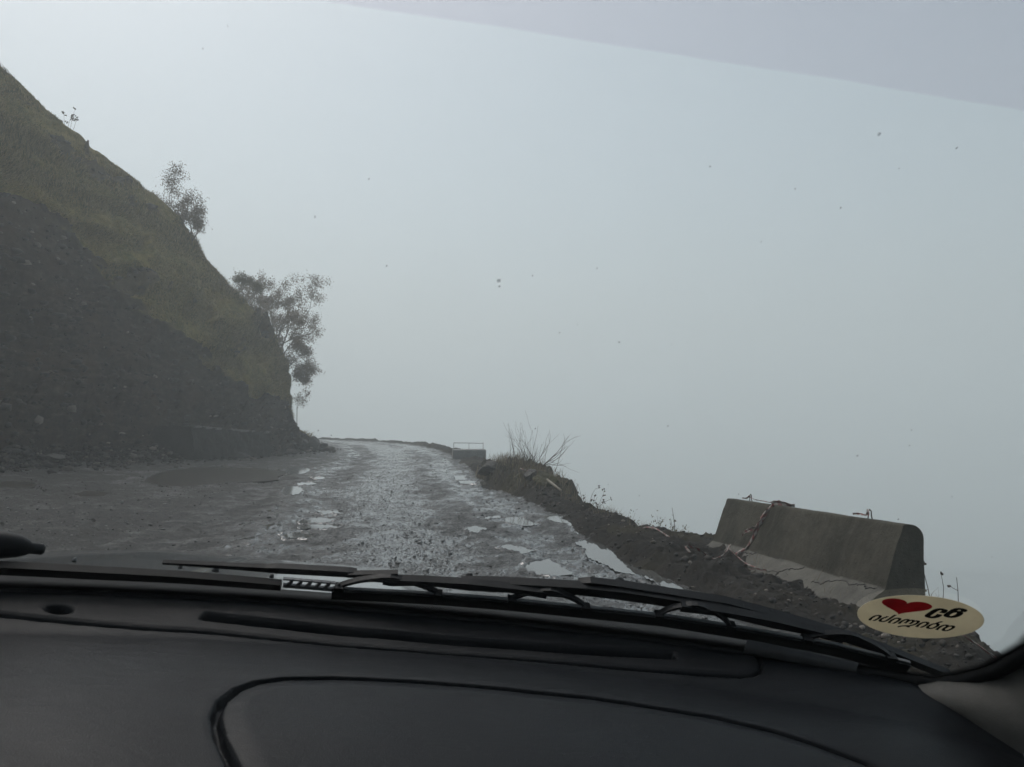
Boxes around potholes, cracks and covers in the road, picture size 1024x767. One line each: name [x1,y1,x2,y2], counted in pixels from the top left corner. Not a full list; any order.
pothole [540,515,589,538]
pothole [516,558,578,578]
pothole [460,526,491,536]
pothole [500,517,541,528]
pothole [494,543,538,555]
